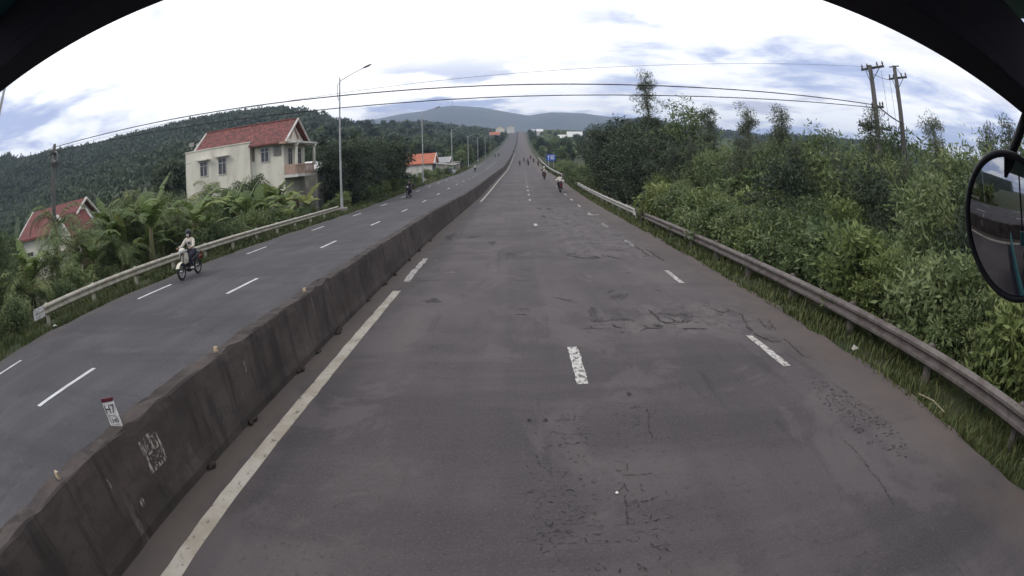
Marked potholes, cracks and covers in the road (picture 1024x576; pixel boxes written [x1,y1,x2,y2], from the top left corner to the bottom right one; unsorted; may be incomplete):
crack [812,378,907,504]
crack [560,298,811,358]
crack [526,411,620,572]
crack [596,402,673,572]
